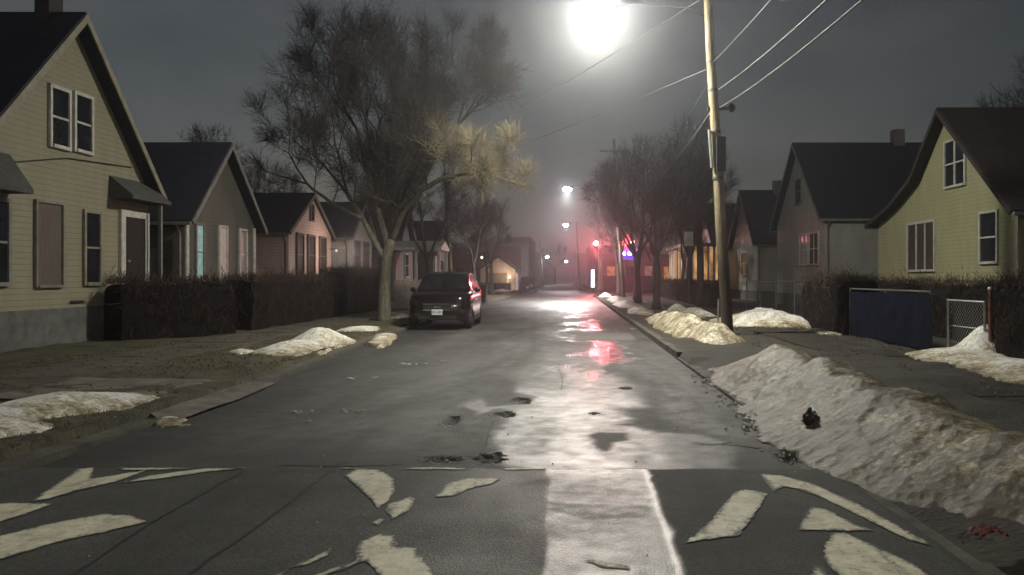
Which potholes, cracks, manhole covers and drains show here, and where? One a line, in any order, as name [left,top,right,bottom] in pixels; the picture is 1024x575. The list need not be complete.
pothole [459,451,514,466]
pothole [504,397,536,405]
pothole [488,410,520,419]
pothole [416,454,473,465]
pothole [438,414,465,426]
